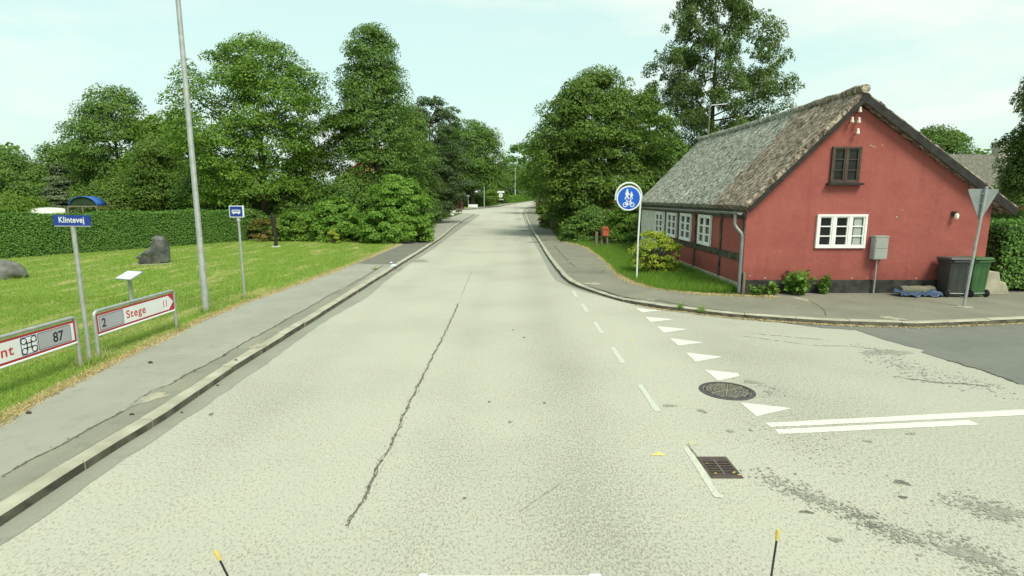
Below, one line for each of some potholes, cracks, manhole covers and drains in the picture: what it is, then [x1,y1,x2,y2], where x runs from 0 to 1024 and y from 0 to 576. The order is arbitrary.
crack [892,360,1019,388]
crack [345,273,471,528]
drain grate [697,457,744,479]
manhole cover [699,382,756,401]
